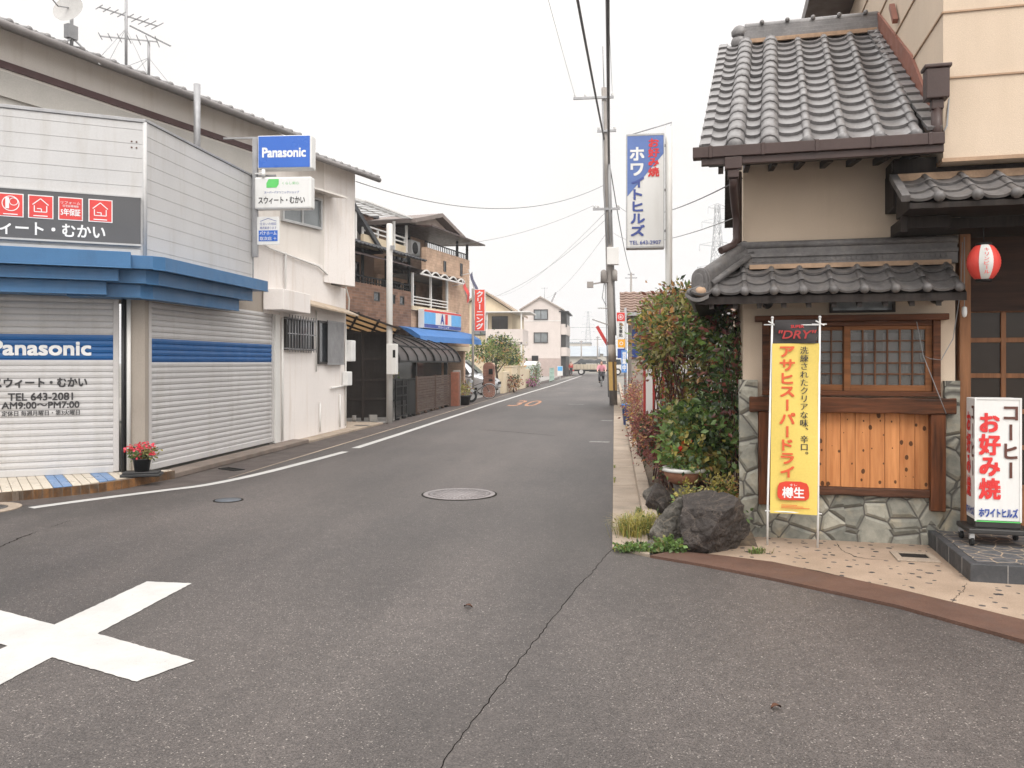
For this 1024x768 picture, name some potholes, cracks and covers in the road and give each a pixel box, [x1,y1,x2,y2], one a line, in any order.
crack [441,550,612,768]
manhole cover [421,488,497,500]
manhole cover [0,502,22,512]
